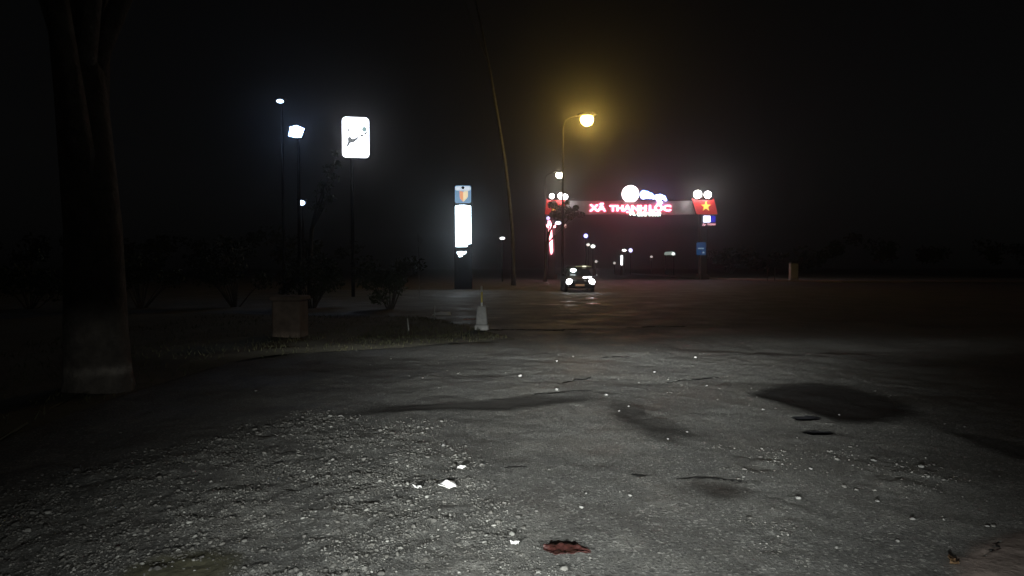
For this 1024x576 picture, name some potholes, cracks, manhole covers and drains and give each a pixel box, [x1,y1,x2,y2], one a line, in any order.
crack [536,377,600,394]
pothole [753,384,911,423]
